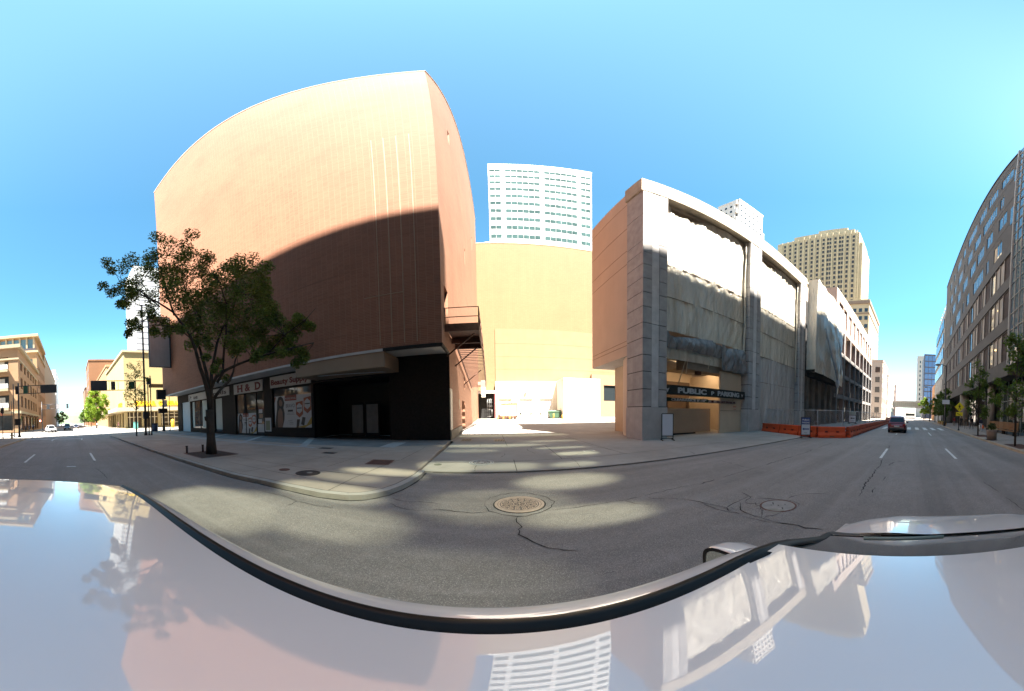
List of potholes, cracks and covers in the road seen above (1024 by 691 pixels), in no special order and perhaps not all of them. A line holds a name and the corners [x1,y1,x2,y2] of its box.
manhole cover [493,496,546,513]
crack [686,493,824,529]
crack [393,493,674,551]
manhole cover [760,500,797,513]
